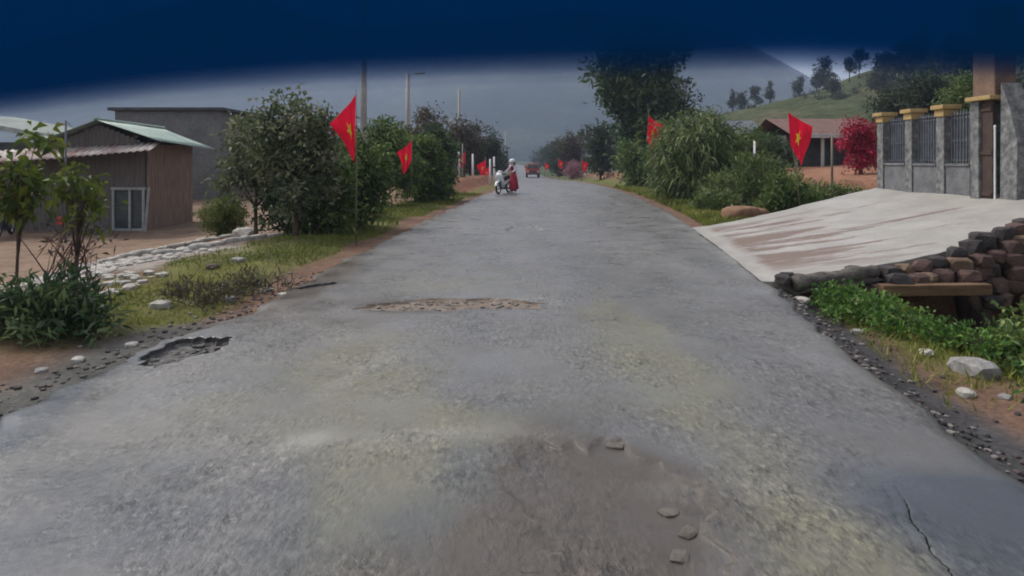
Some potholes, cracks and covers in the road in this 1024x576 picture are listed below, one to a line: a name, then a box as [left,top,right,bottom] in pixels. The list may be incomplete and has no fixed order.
pothole [469,426,774,576]
crack [882,484,968,576]
pothole [125,334,242,372]
pothole [346,296,558,313]
